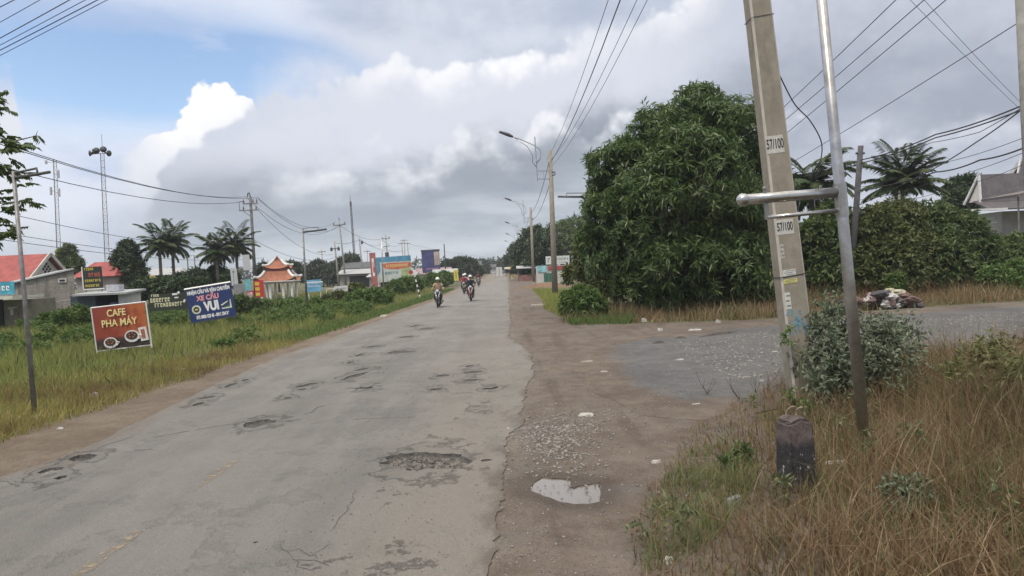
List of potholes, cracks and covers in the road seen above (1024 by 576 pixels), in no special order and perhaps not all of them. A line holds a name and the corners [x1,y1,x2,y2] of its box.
pothole [529,477,601,504]
pothole [242,419,276,428]
pothole [69,454,97,462]
pothole [37,467,64,475]
pothole [379,452,473,471]
crack [280,490,356,571]
